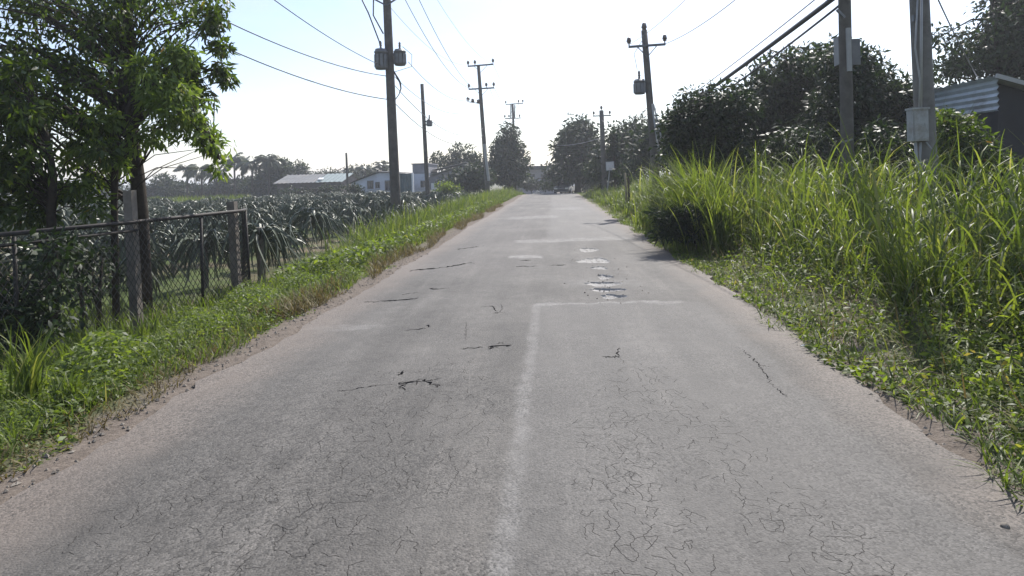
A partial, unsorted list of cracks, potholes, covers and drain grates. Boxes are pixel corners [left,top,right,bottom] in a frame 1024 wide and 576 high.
crack [41,358,503,576]
crack [743,350,784,395]
crack [673,403,907,576]
crack [572,361,716,576]
